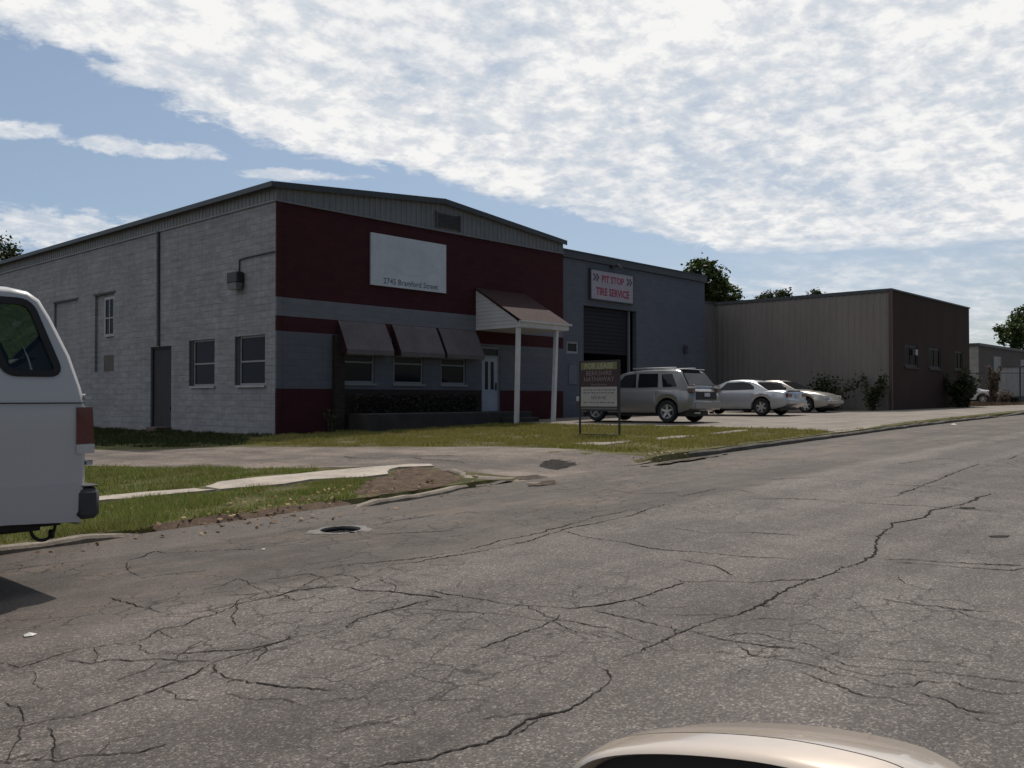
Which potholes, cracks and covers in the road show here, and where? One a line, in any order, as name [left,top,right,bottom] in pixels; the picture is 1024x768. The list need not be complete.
crack [1,458,1024,763]
manhole cover [305,525,374,535]
